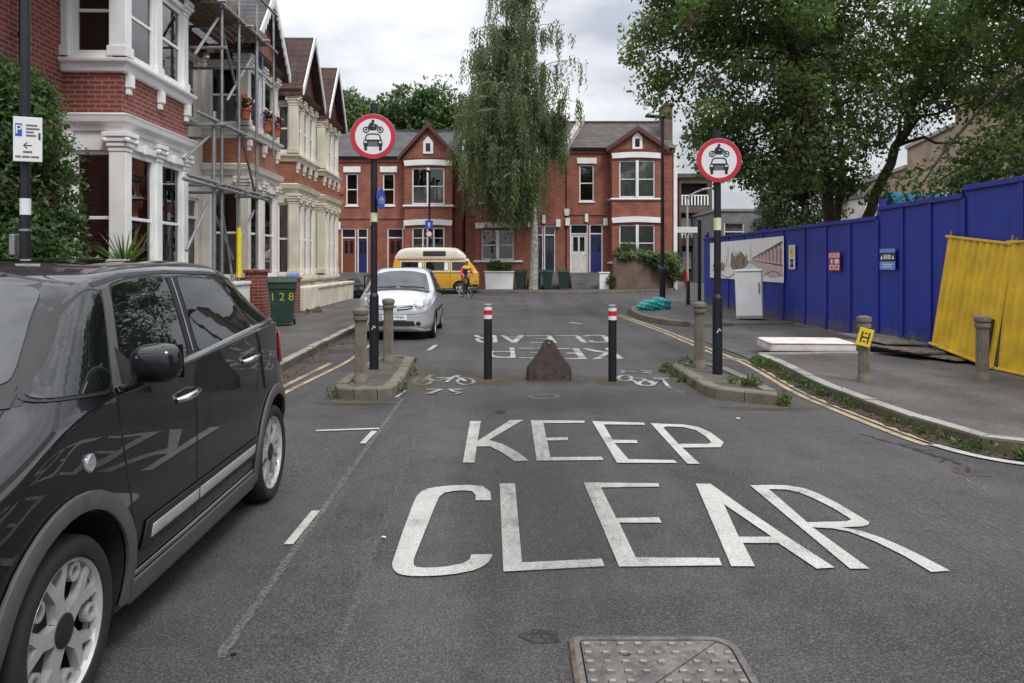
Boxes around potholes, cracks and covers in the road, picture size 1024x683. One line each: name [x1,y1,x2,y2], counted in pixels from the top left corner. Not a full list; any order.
manhole cover [569,635,759,683]
crack [857,433,988,493]
